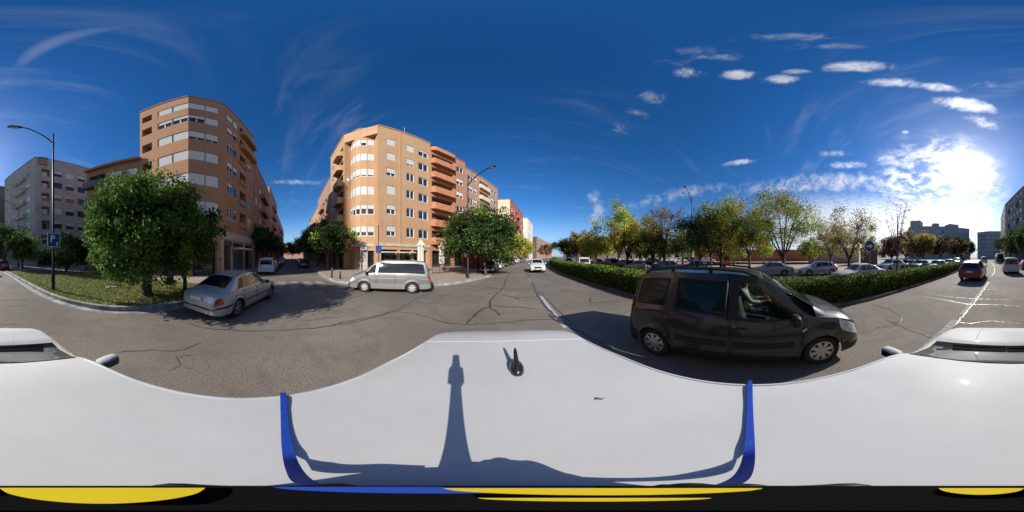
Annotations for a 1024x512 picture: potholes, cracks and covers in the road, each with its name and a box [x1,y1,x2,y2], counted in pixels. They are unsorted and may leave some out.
crack [123,290,448,371]
crack [0,289,1024,325]
crack [877,305,929,337]
